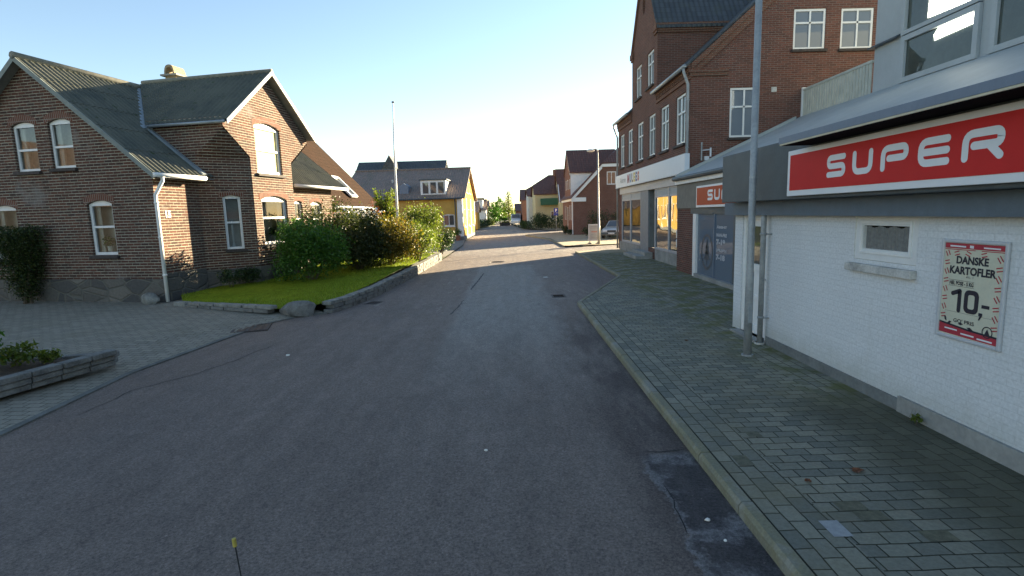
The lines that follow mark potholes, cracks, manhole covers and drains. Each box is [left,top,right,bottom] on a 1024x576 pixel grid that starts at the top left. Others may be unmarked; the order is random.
crack [79,346,271,415]
crack [664,485,687,532]
